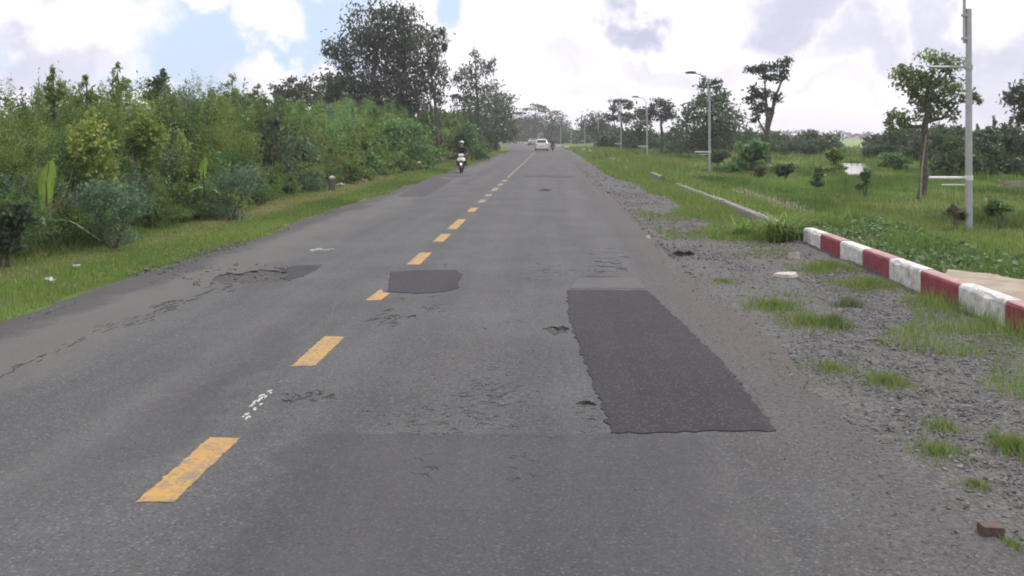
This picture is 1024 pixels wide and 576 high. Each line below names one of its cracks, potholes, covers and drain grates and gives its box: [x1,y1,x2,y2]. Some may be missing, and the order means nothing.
crack [0,270,231,378]
crack [366,295,443,327]
pothole [543,326,570,336]
crack [281,390,336,403]
crack [570,248,629,277]
pothole [211,269,287,284]
